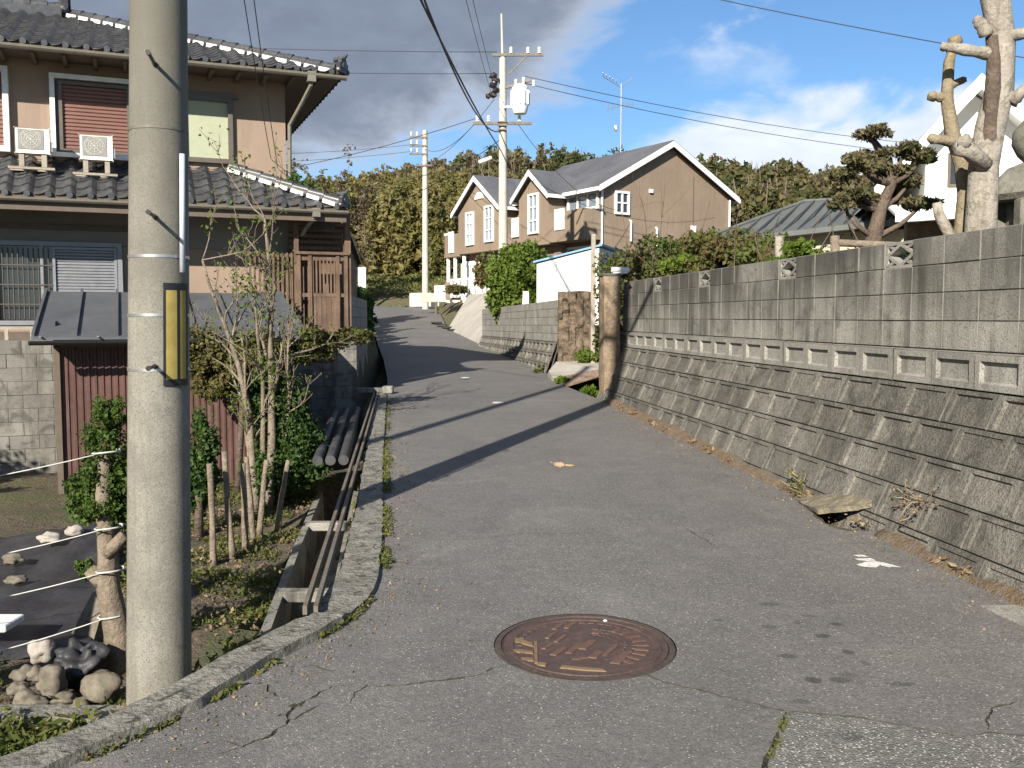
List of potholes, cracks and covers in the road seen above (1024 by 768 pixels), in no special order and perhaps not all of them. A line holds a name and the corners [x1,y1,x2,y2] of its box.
manhole cover [495,614,676,682]
crack [218,665,496,754]
crack [647,674,1024,737]
